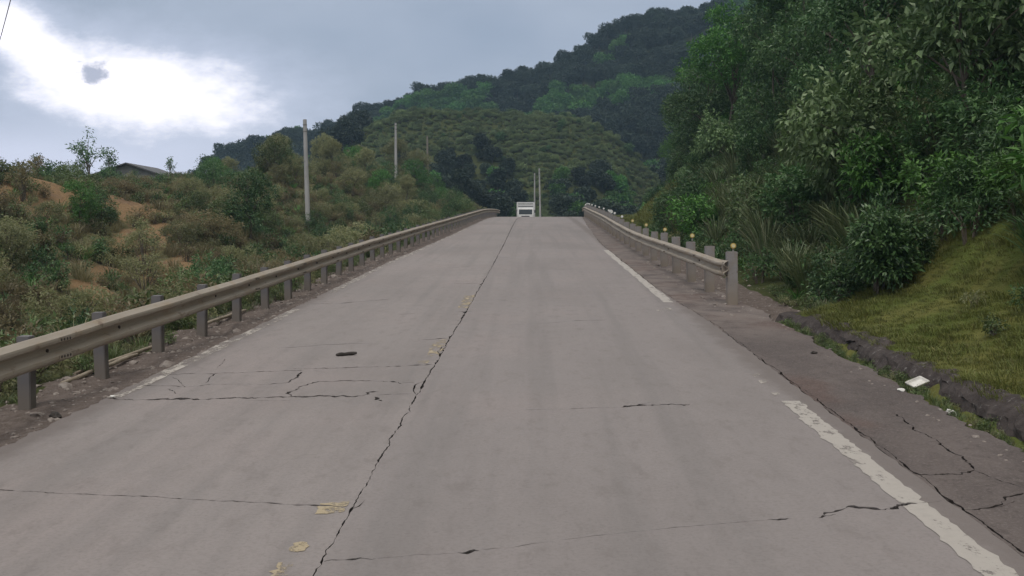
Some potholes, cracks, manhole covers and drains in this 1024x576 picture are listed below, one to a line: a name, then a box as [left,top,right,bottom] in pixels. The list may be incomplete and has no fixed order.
crack [329,504,908,561]
crack [109,219,517,574]
